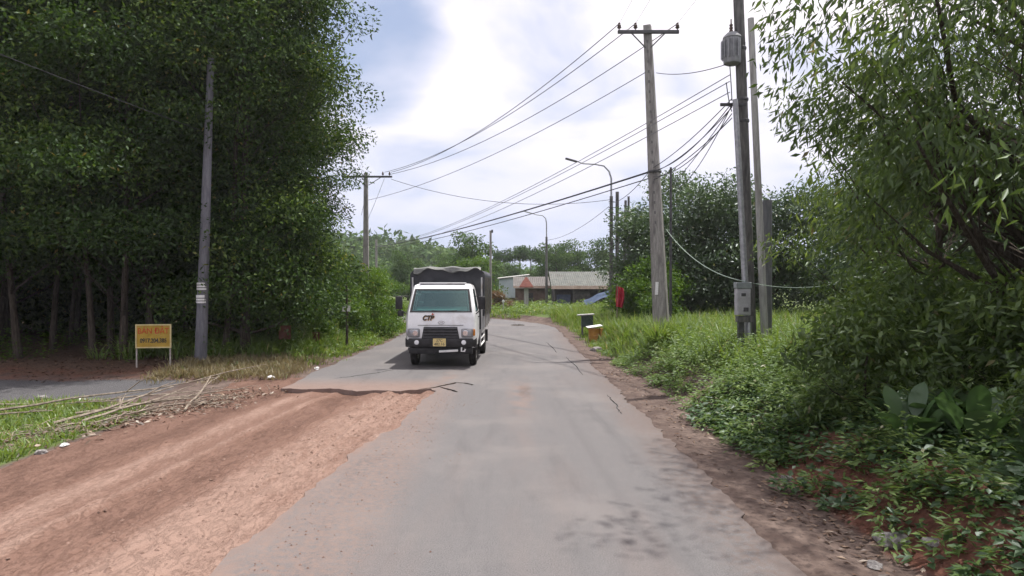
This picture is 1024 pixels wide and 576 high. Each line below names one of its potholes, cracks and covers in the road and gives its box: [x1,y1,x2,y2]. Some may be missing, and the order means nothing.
crack [425,383,473,392]
